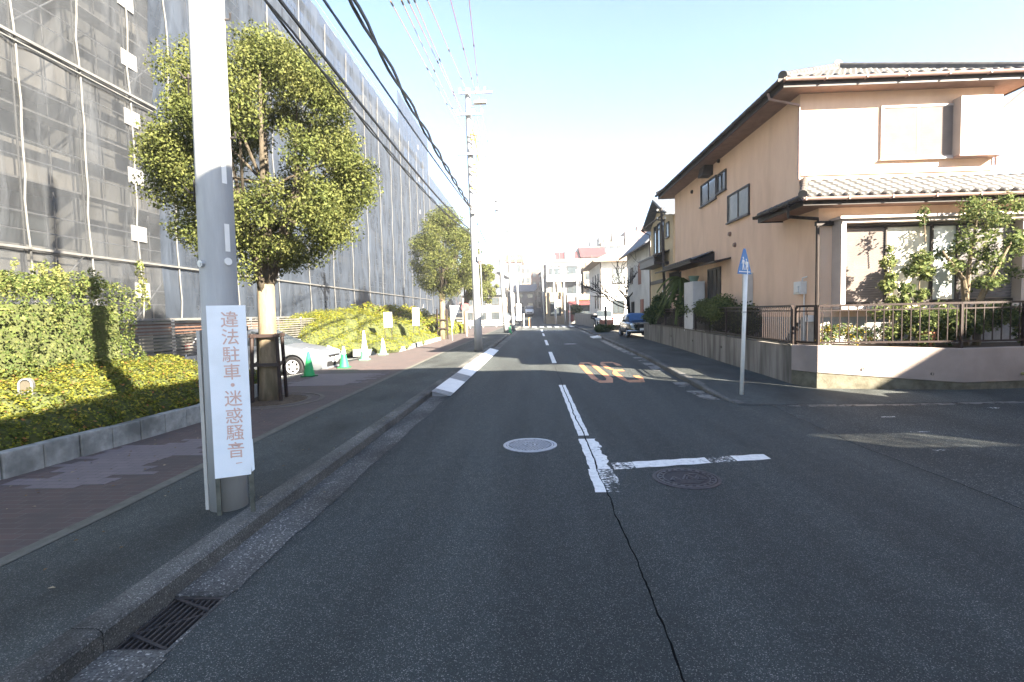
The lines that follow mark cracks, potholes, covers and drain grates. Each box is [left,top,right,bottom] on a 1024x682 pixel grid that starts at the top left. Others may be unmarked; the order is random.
manhole cover [652,468,722,490]
drain grate [99,591,233,657]
manhole cover [503,438,557,452]
crack [555,368,685,682]
